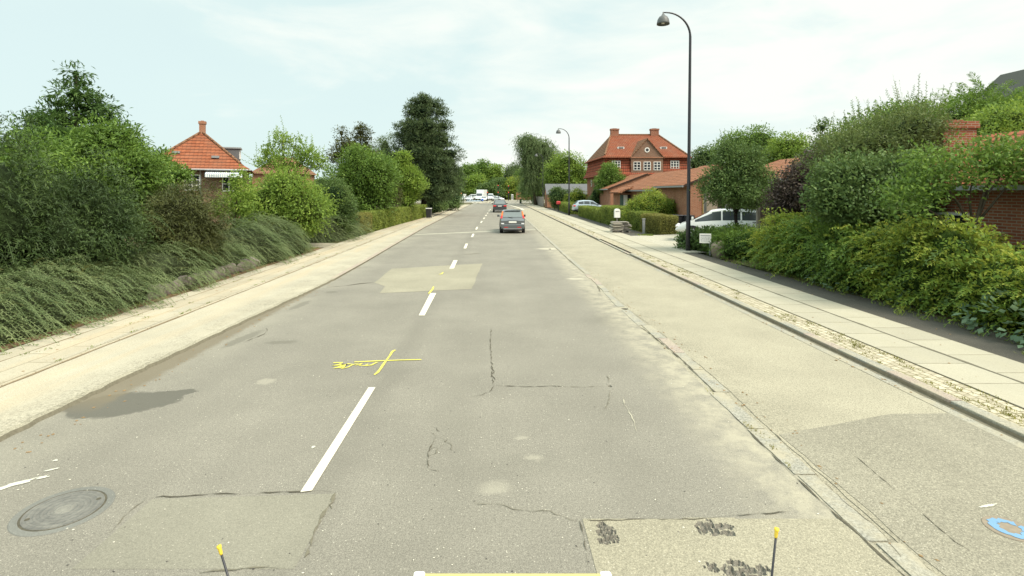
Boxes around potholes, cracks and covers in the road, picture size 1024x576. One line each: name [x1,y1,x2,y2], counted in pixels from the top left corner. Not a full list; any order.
manhole cover [7,486,116,537]
crack [477,503,782,551]
crack [472,330,636,429]
